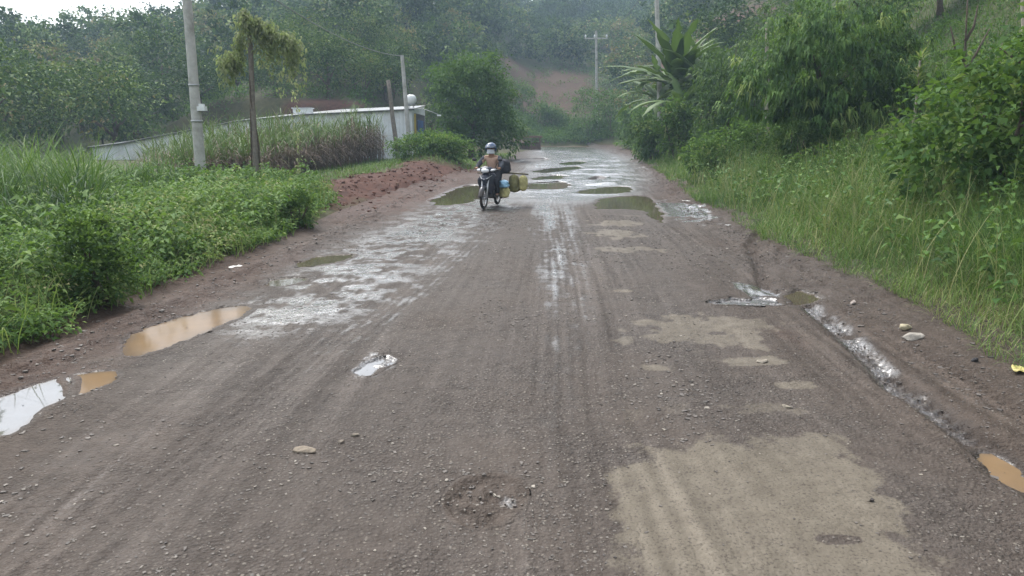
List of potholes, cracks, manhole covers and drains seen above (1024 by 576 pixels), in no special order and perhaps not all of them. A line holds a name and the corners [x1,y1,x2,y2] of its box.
pothole [0,375,82,439]
pothole [585,195,675,224]
pothole [423,184,480,206]
pothole [56,368,127,399]
pothole [705,296,793,307]
pothole [777,287,830,309]
pothole [963,447,1024,497]
pothole [346,354,403,377]
pothole [440,472,532,531]
pothole [113,304,258,358]
